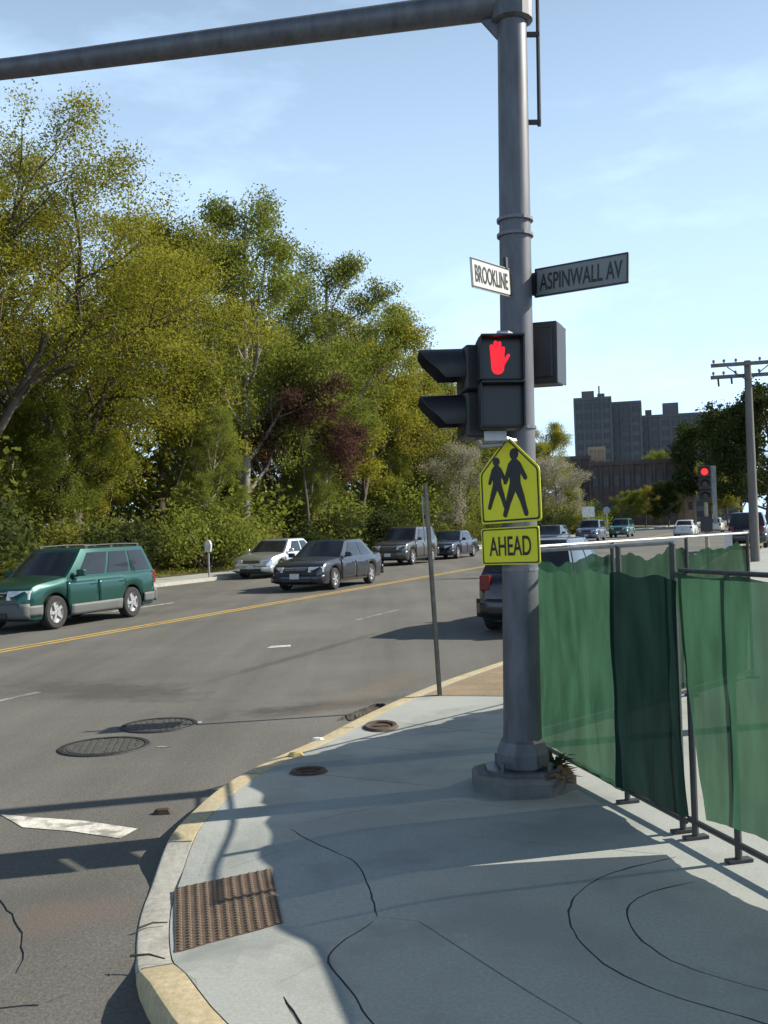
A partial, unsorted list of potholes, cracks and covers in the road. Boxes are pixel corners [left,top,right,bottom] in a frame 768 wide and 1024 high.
crack [0,900,124,1009]
utility cover [289,766,328,776]
crack [283,996,302,1024]
crack [291,829,377,1024]
manhole cover [56,736,151,757]
utility cover [363,720,399,732]
manhole cover [119,717,198,734]
